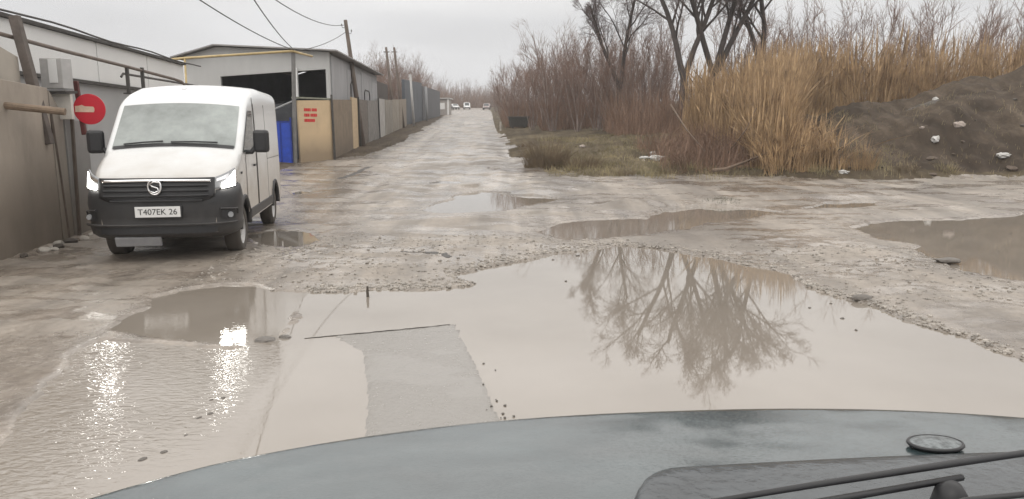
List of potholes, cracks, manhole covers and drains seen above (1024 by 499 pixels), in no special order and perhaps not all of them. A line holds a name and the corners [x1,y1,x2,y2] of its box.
pothole [247,228,330,248]
pothole [528,203,789,241]
pothole [0,243,1024,499]
pothole [848,211,1024,282]
pothole [417,190,571,213]
